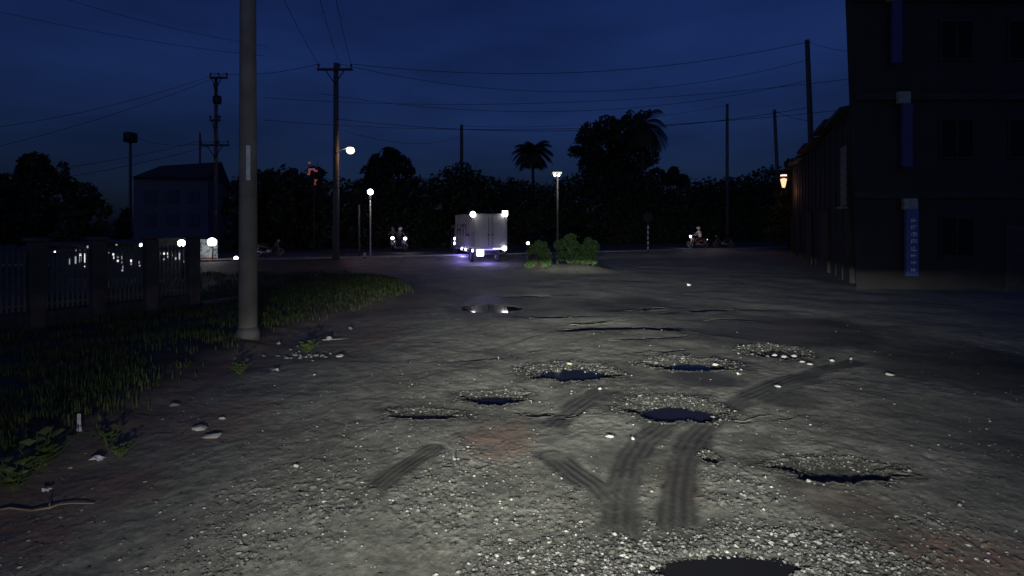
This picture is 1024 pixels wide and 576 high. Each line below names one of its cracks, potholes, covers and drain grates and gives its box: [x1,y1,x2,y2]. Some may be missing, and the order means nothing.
pothole [378,407,471,421]
pothole [455,303,527,314]
pothole [733,343,818,361]
crack [731,414,795,425]
pothole [452,389,536,408]
pothole [751,453,938,487]
pothole [628,353,751,373]
pothole [621,543,826,576]
crack [529,307,756,353]
pothole [606,393,741,427]
pothole [696,448,726,466]
pothole [511,360,639,385]
